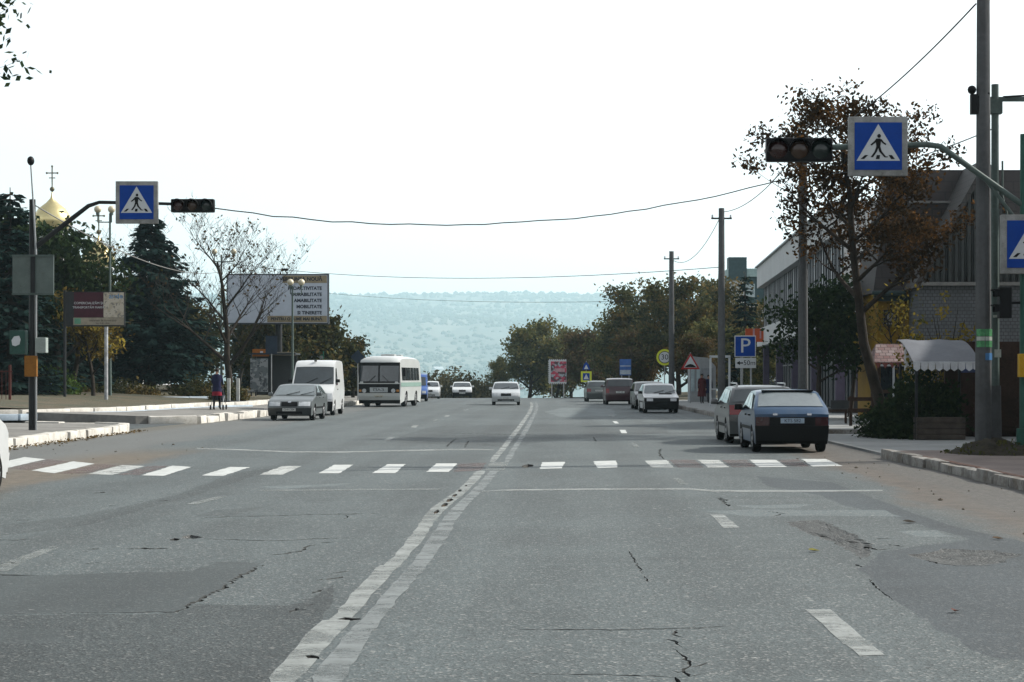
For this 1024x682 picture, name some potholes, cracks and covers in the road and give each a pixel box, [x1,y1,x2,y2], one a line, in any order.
pothole [787,520,872,559]
crack [524,626,721,682]
crack [53,538,337,614]
